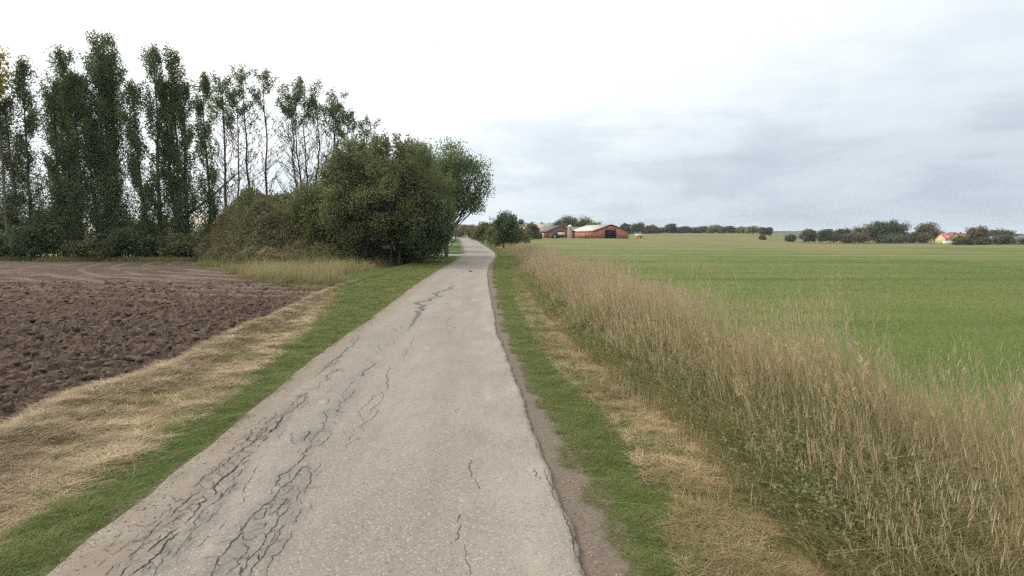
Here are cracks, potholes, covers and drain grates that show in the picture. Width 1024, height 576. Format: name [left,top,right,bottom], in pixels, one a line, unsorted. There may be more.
crack [98,325,375,576]
crack [349,284,458,442]
crack [535,471,583,574]
